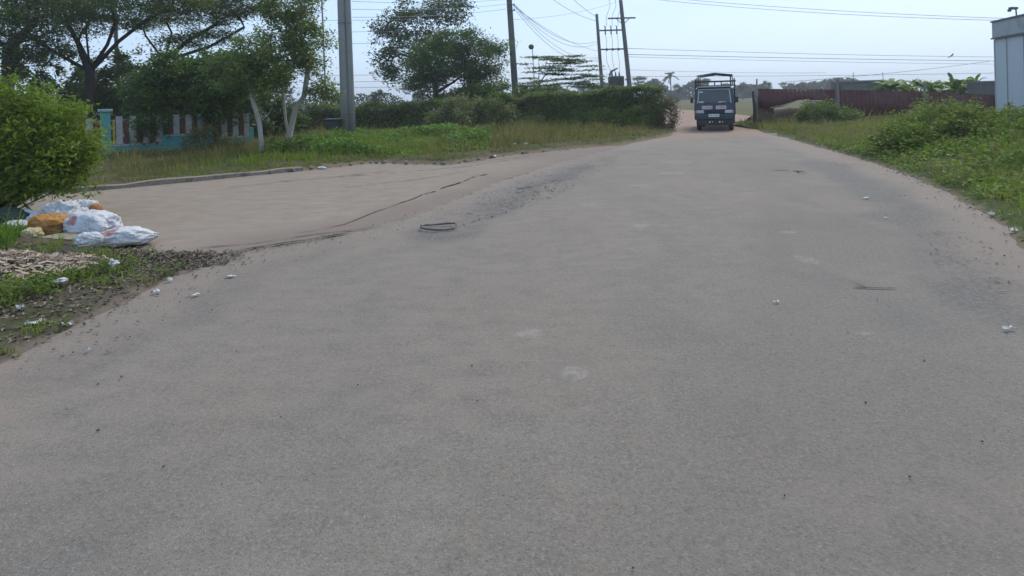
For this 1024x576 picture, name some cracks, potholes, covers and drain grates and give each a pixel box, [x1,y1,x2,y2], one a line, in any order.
crack [200,174,486,258]
